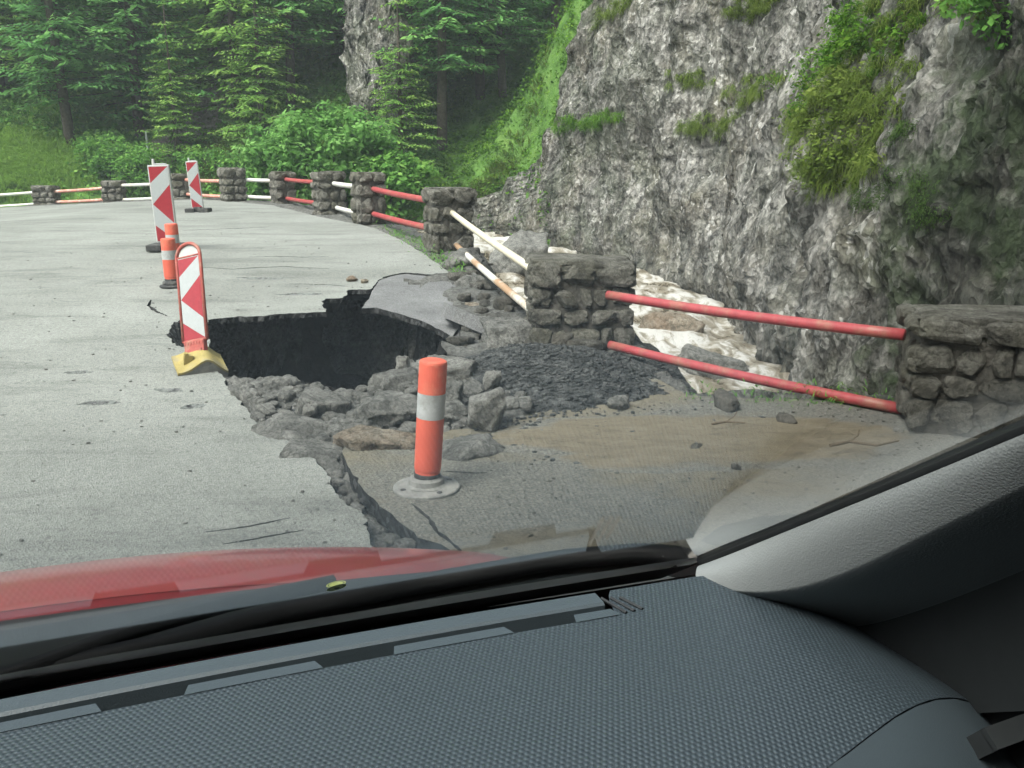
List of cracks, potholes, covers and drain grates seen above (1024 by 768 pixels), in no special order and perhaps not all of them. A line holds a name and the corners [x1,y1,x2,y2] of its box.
pothole [166,320,184,347]
pothole [247,287,461,391]
